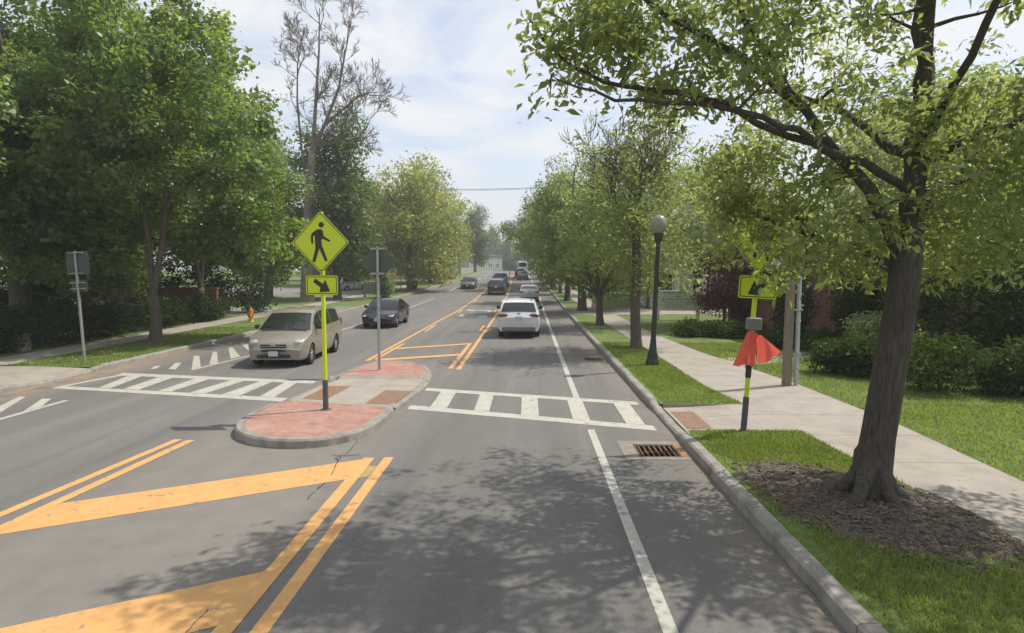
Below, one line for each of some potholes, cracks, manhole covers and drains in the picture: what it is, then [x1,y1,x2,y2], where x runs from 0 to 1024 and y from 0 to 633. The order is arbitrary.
crack [308,442,358,499]
drain grate [617,441,694,460]
